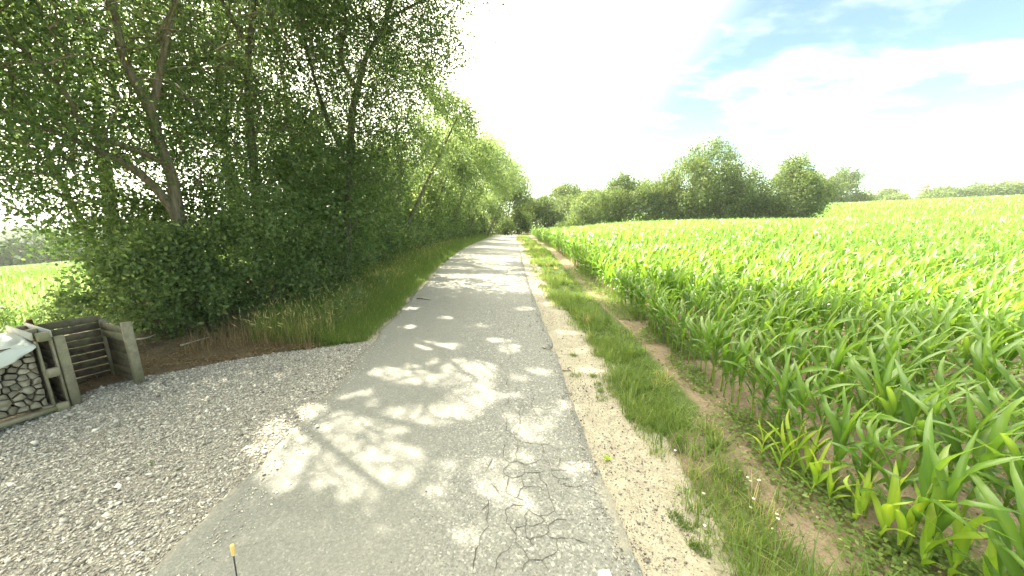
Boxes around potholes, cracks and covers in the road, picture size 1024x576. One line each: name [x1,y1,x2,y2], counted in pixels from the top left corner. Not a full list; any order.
crack [473,392,583,572]
